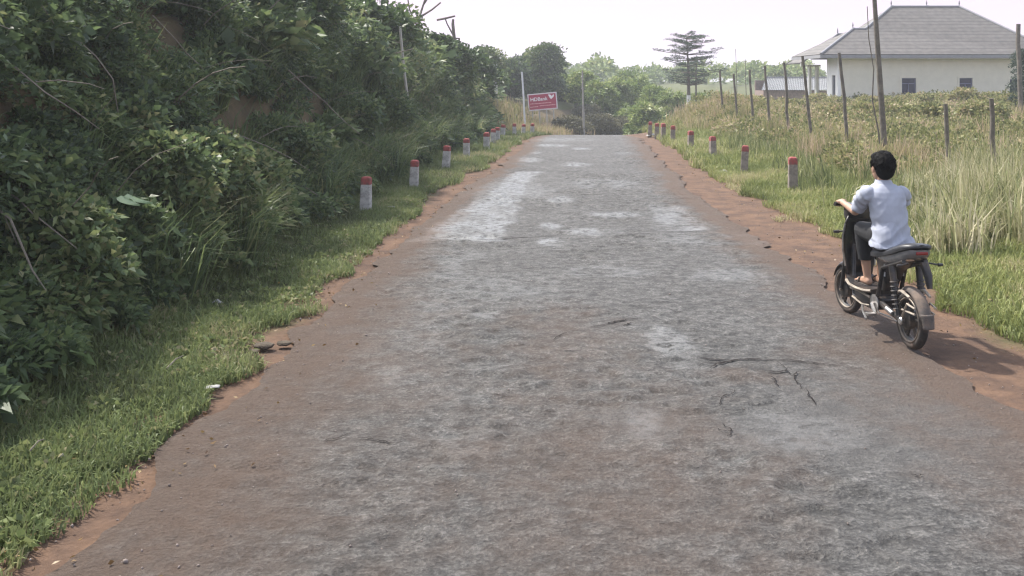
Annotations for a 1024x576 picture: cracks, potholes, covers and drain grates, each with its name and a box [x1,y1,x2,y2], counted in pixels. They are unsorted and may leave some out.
crack [699,357,839,404]
